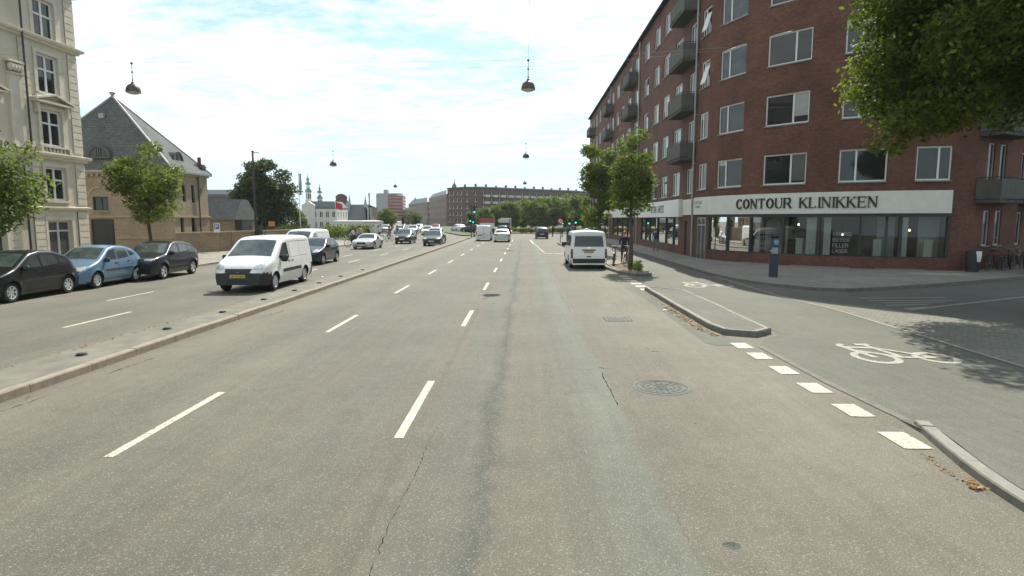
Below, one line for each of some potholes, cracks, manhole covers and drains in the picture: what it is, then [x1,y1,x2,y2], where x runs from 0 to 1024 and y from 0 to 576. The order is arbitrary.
manhole cover [632,380,691,395]
crack [369,430,435,576]
